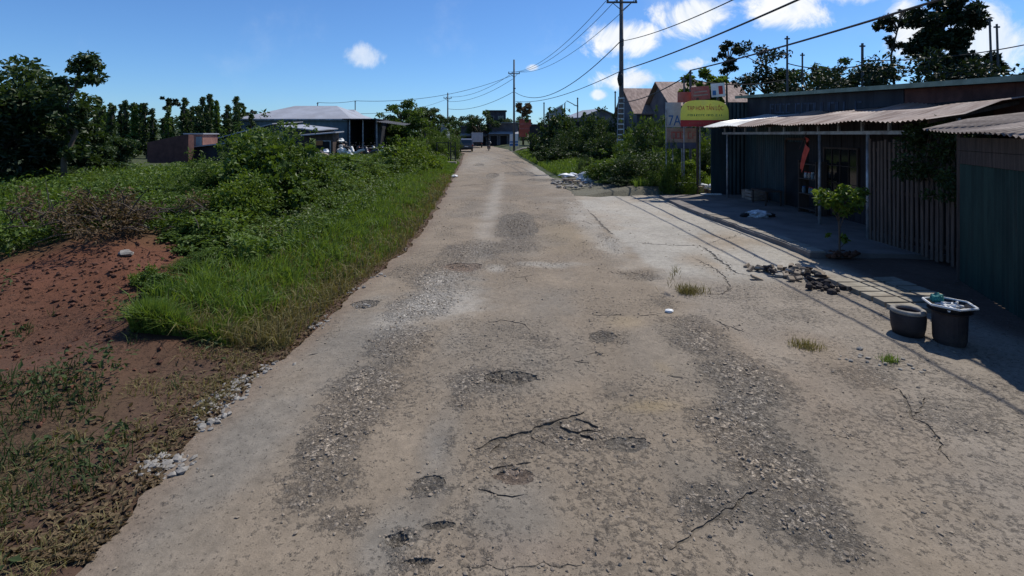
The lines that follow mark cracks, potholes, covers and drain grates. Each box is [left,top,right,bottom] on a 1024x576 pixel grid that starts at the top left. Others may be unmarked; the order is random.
pothole [385,532,410,549]
crack [899,389,950,461]
pothole [492,468,535,485]
crack [639,234,749,295]
pothole [588,330,618,344]
pothole [445,263,482,272]
pothole [350,300,380,309]
pothole [413,475,446,495]
crack [474,412,598,498]
pothole [403,557,436,566]
pothole [605,436,651,453]
pothole [421,521,456,530]
